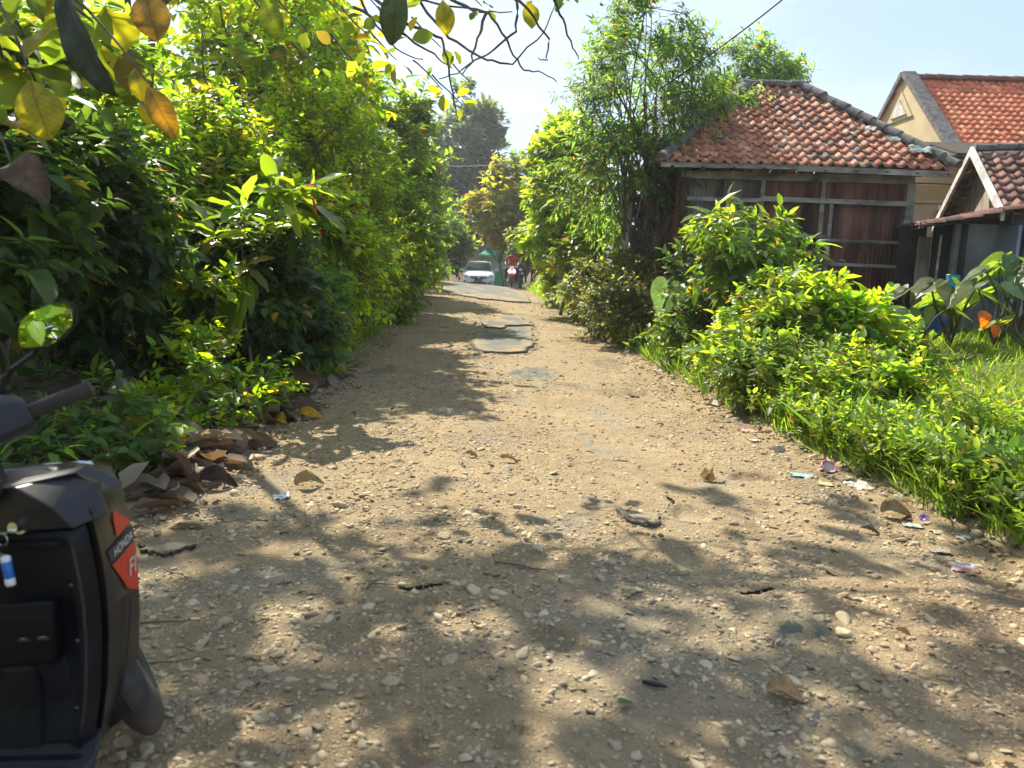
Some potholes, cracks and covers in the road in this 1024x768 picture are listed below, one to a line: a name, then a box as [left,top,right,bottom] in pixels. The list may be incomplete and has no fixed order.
crack [739,587,774,595]
